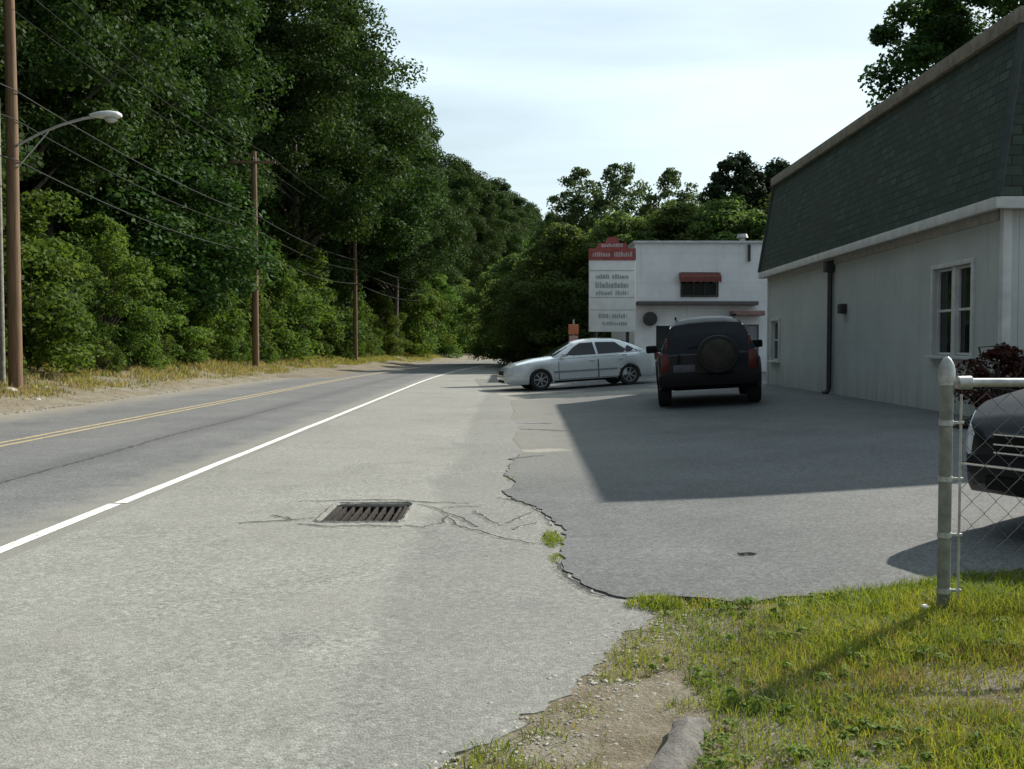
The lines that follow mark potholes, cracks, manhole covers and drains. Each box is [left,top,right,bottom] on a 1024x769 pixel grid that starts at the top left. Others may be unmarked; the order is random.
drain grate [312,502,415,523]
crack [240,497,605,597]
